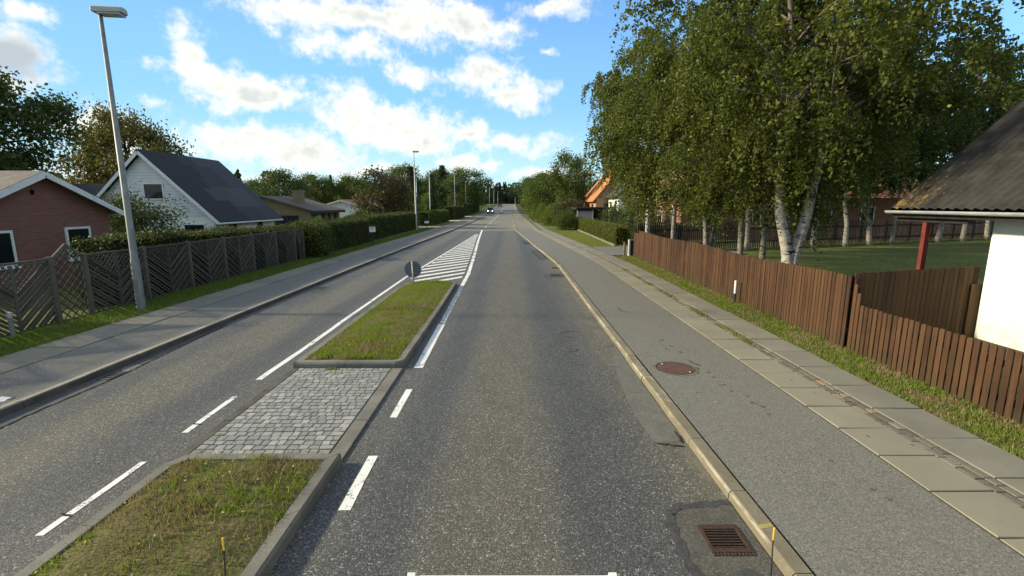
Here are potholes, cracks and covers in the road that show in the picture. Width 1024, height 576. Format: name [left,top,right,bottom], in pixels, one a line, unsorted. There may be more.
drain grate [696,524,756,556]
manhole cover [652,361,699,376]
